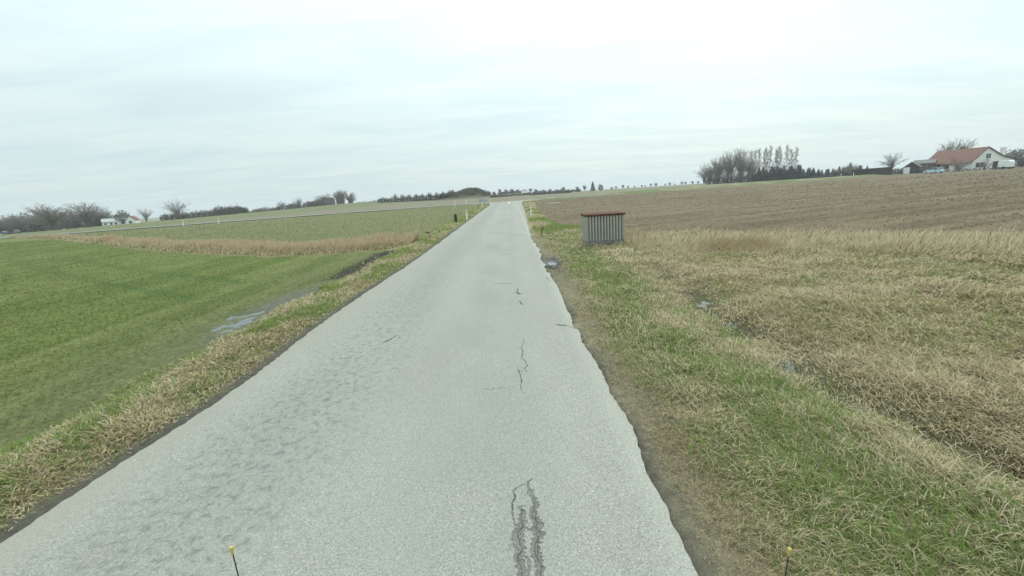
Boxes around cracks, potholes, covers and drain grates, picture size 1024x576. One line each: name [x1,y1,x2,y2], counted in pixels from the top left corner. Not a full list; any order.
crack [510,479,546,576]
pothole [541,258,560,268]
